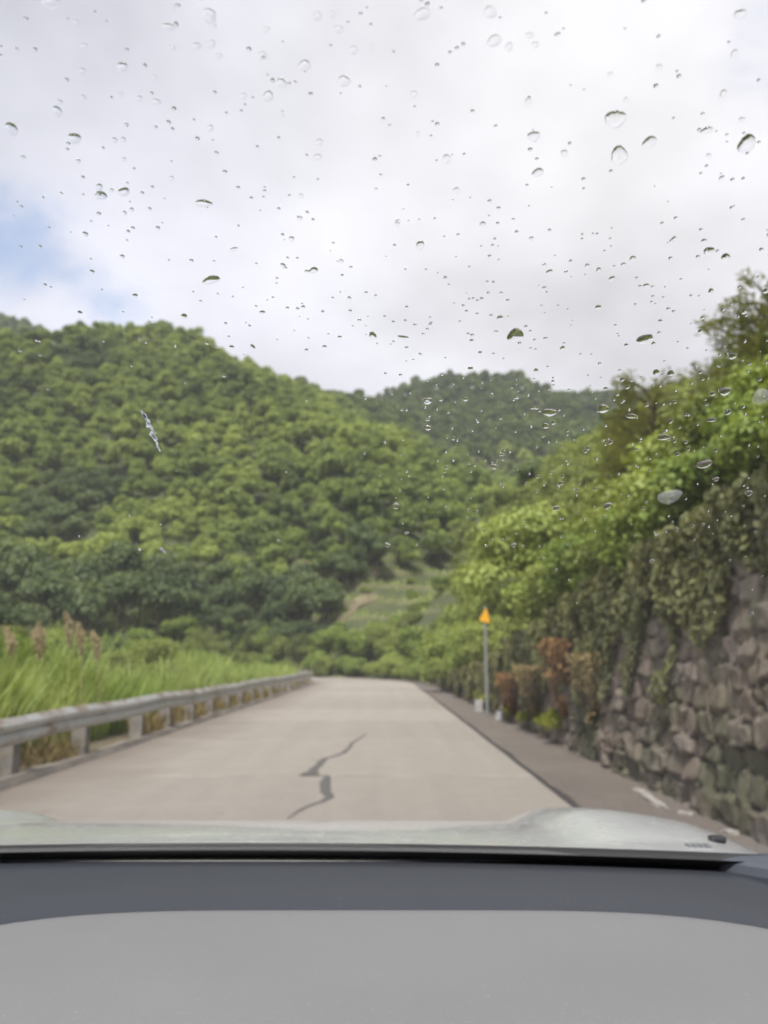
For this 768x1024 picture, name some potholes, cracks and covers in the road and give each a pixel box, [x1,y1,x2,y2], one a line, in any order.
crack [288,733,366,819]
